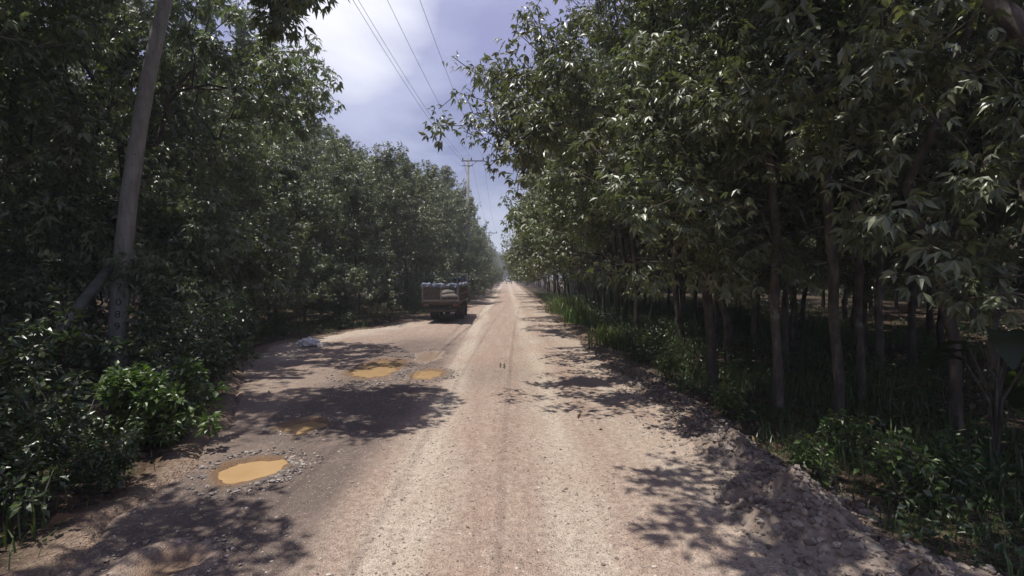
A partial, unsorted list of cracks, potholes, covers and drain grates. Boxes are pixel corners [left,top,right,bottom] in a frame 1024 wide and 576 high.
pothole [268,409,346,440]
pothole [183,446,324,500]
pothole [392,366,459,383]
pothole [325,356,424,394]
